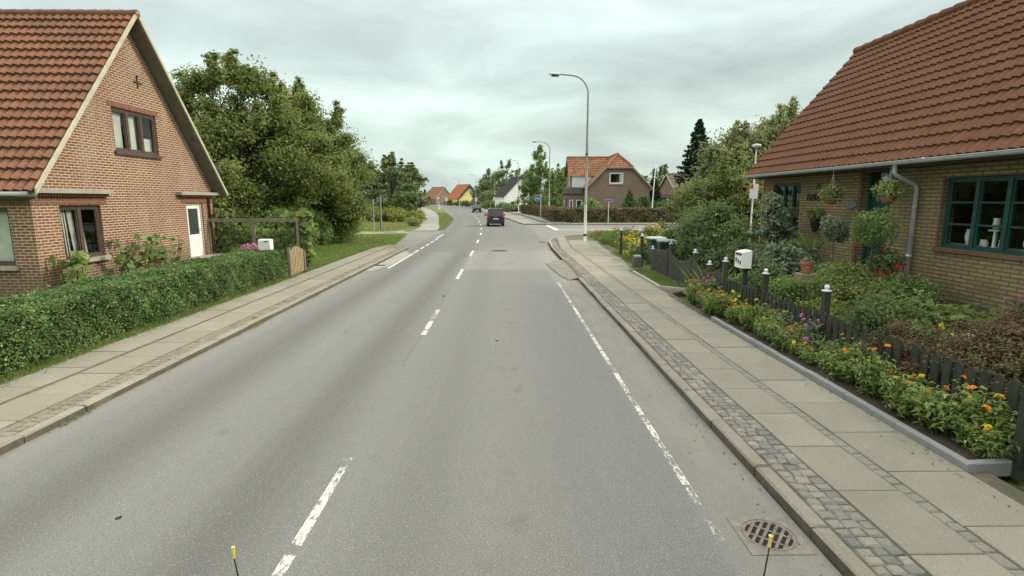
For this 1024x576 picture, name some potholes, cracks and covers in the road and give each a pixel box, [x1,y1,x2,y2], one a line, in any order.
drain grate [726,516,817,556]
